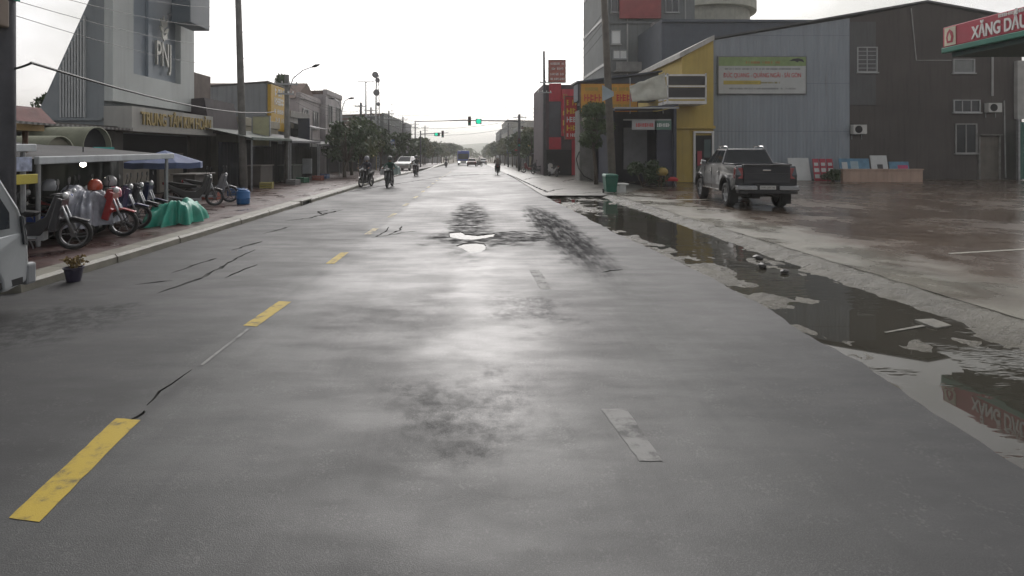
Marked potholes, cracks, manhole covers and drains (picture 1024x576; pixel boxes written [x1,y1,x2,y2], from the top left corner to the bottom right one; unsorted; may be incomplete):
pothole [449,232,495,240]
crack [135,209,344,293]
pothole [457,242,486,253]
